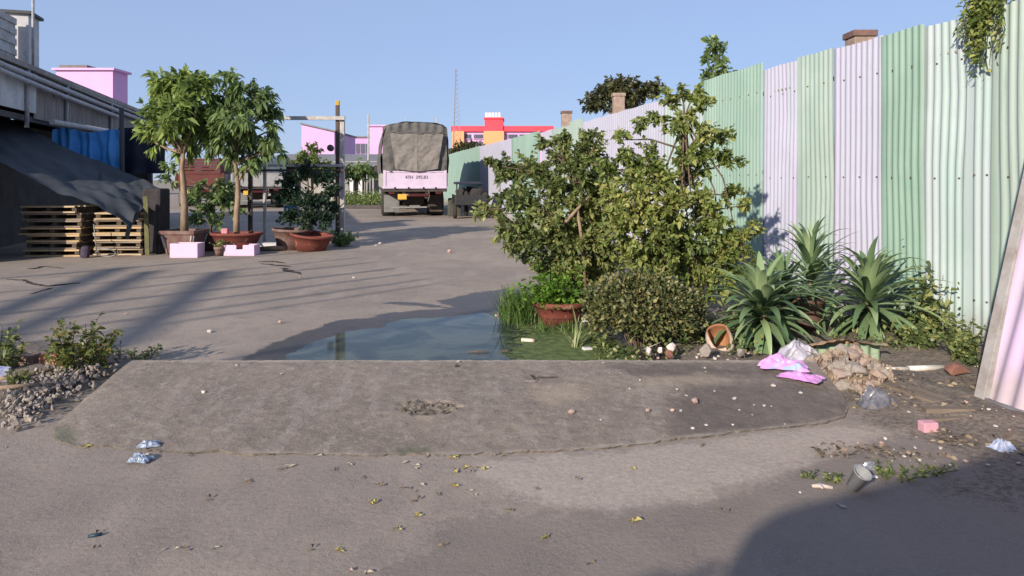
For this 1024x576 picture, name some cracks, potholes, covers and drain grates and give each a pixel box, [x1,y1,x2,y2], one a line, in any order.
crack [11,266,74,294]
pothole [399,399,457,416]
crack [258,261,300,274]
